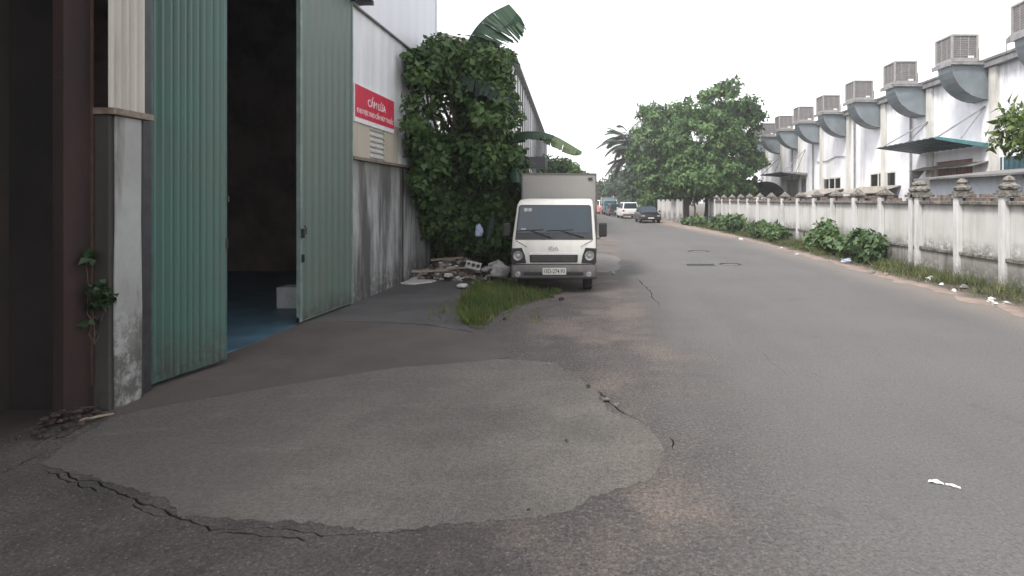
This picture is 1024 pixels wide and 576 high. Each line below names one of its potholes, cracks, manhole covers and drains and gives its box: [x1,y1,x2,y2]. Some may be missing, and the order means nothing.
crack [48,471,347,542]
